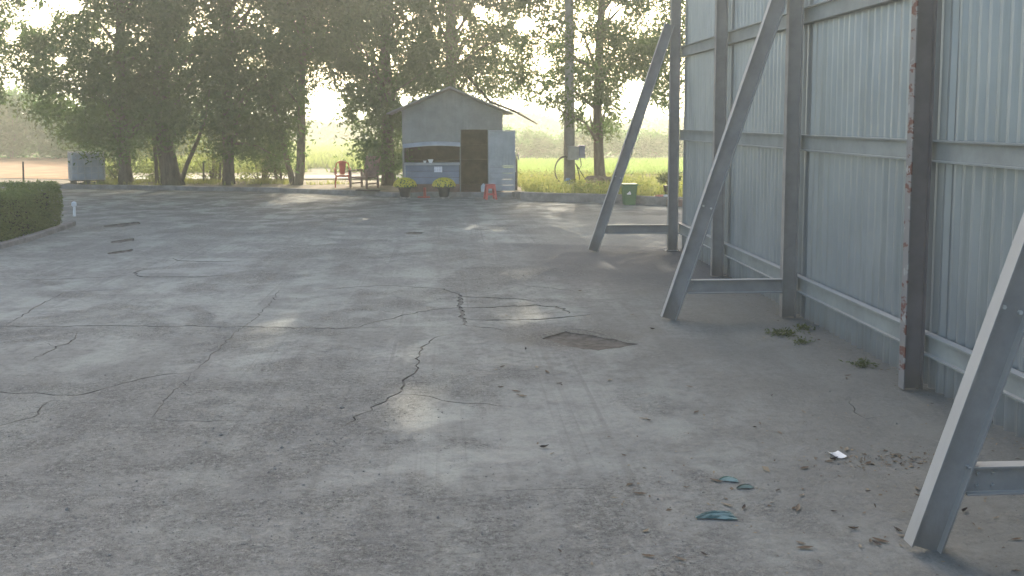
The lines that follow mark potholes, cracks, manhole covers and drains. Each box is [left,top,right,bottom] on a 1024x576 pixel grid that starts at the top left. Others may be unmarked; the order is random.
crack [8,259,230,323]
crack [320,285,607,336]
crack [0,292,278,426]
crack [345,335,496,426]
